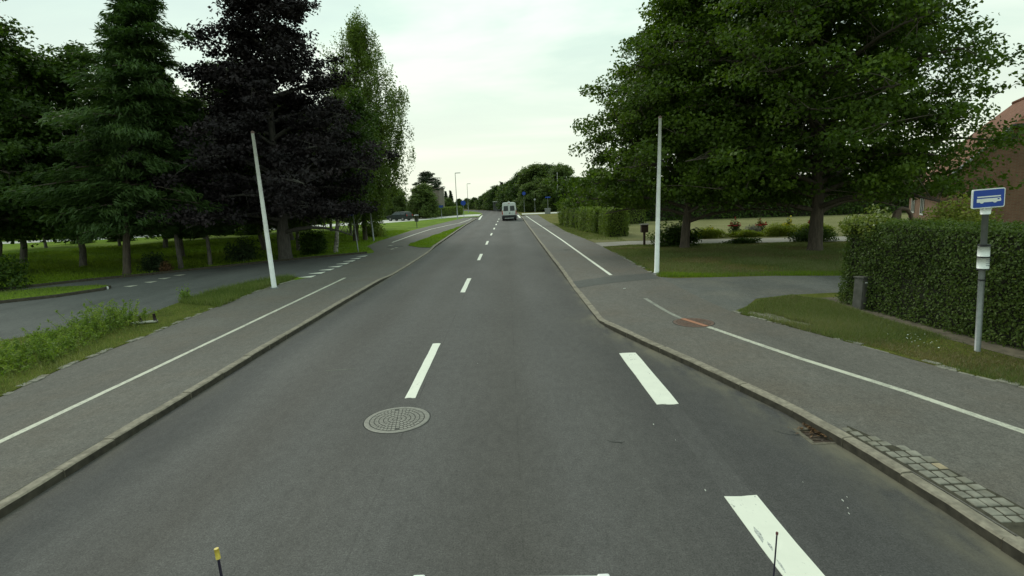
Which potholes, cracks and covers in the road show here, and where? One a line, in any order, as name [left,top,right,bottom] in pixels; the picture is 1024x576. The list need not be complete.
manhole cover [363,407,431,434]
manhole cover [672,318,715,327]
drain grate [792,428,836,445]
